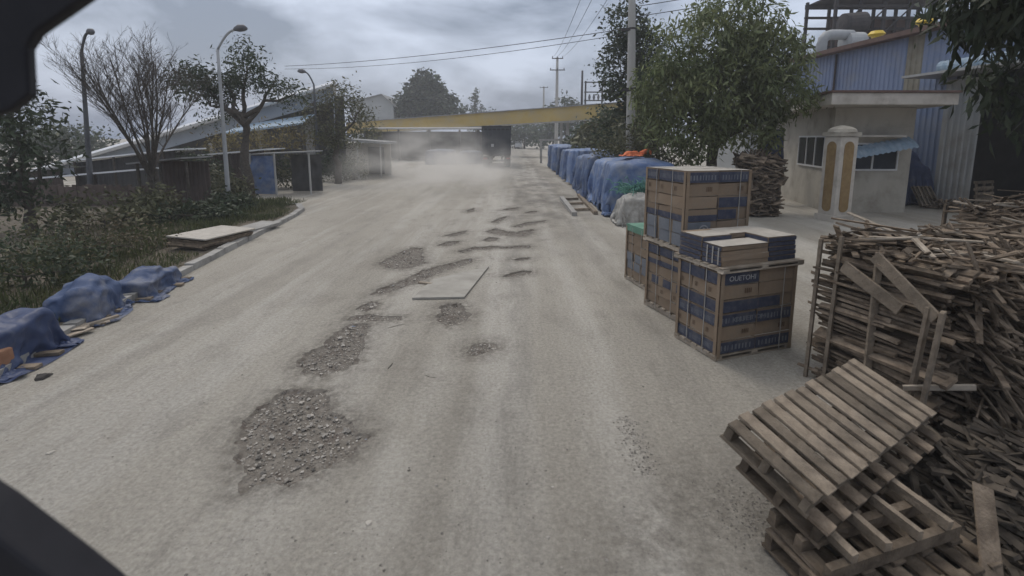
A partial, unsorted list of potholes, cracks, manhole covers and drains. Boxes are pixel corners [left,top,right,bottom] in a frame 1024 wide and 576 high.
pothole [378,247,427,269]
pothole [486,228,535,237]
pothole [466,343,498,357]
pothole [459,245,531,253]
pothole [435,303,472,326]
pothole [233,389,372,494]
pothole [370,258,473,295]
pothole [296,323,372,378]
